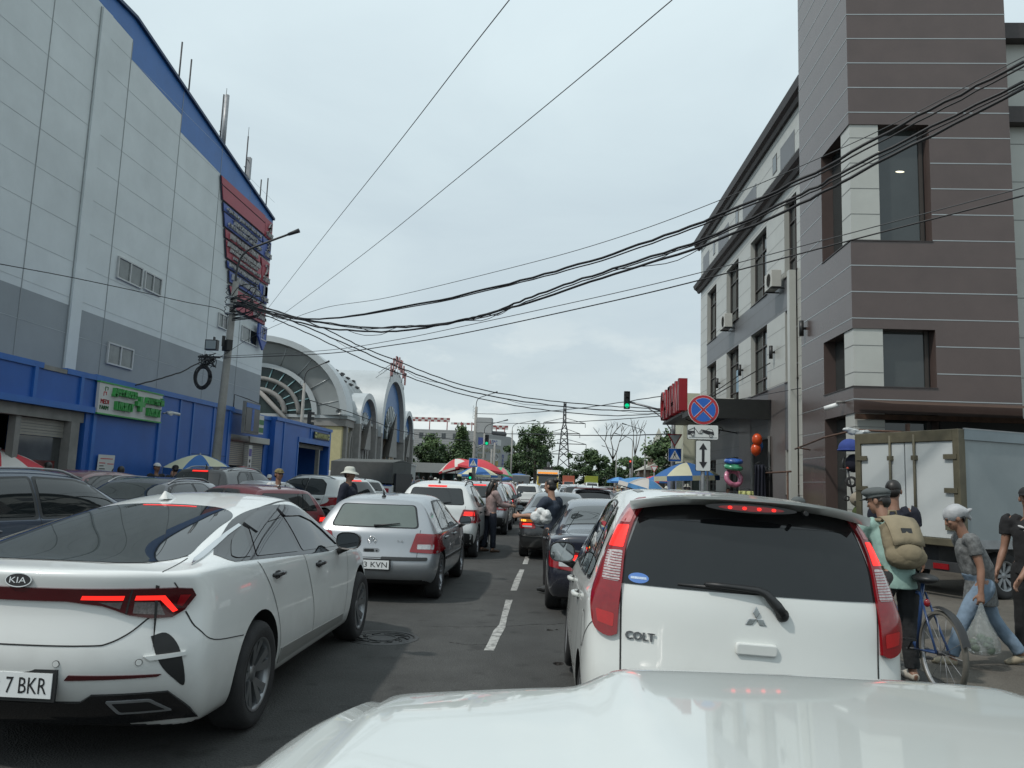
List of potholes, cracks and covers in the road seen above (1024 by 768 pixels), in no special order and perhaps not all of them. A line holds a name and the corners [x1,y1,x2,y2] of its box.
manhole cover [347,630,419,645]
